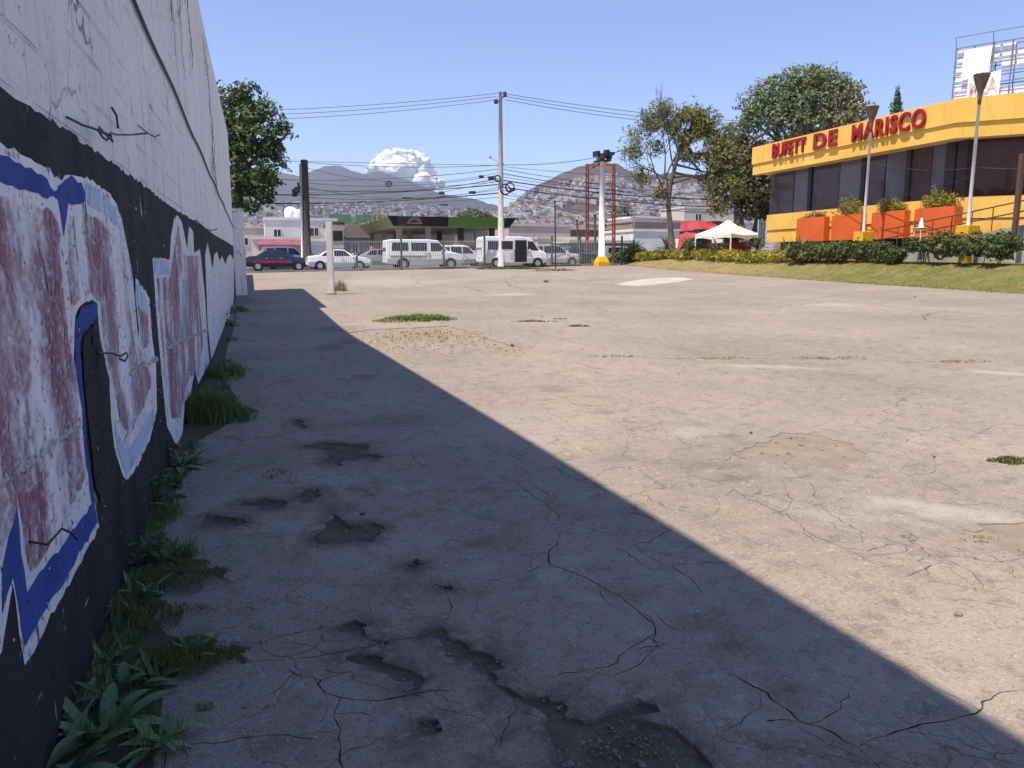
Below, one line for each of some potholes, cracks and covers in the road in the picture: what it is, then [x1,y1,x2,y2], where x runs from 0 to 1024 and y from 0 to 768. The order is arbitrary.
pothole [239,498,287,509]
crack [688,474,1020,591]
crack [472,540,680,683]
crack [435,584,543,749]
pothole [312,514,385,545]
pothole [304,442,383,466]
crack [164,622,495,768]
crack [722,653,1024,768]
pothole [195,515,249,527]
pothole [345,653,424,692]
pothole [291,489,321,502]
crack [406,430,618,534]
